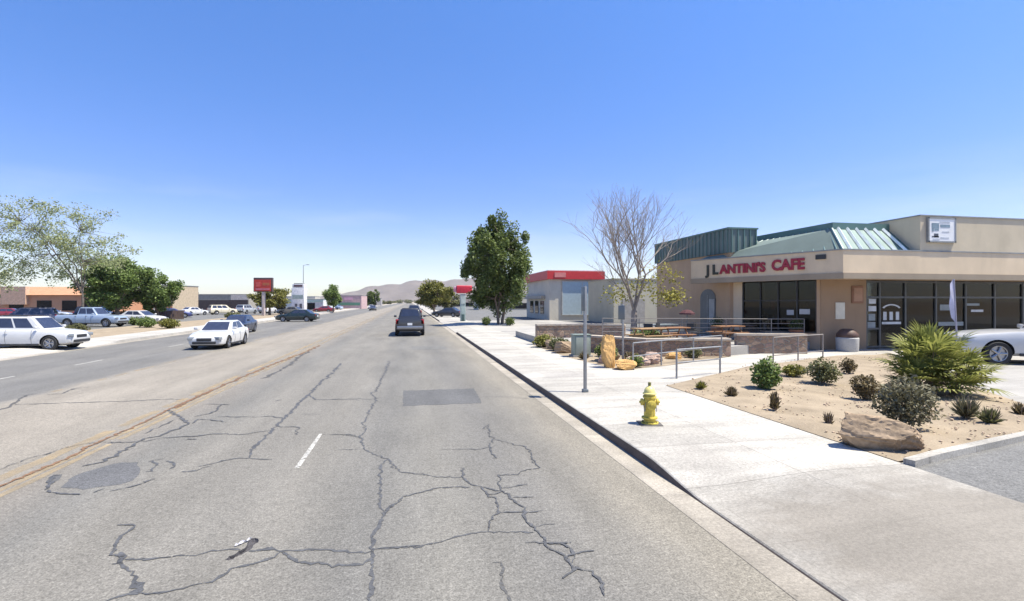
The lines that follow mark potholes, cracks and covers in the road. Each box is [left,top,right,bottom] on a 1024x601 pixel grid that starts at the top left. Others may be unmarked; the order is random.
crack [0,351,605,601]
